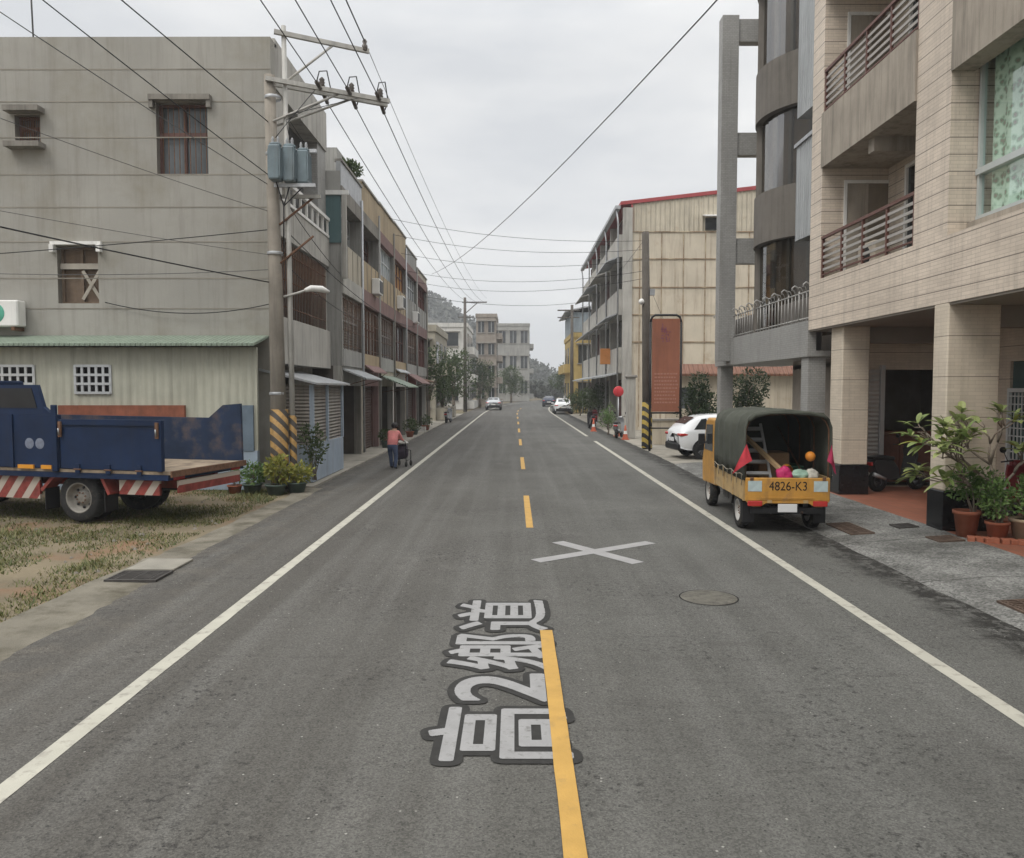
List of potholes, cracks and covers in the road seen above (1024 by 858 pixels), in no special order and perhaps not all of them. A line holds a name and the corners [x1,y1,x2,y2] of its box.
drain grate [103,570,174,583]
drain grate [826,522,875,535]
drain grate [925,535,966,543]
manhole cover [679,590,739,606]
drain grate [996,599,1024,614]
